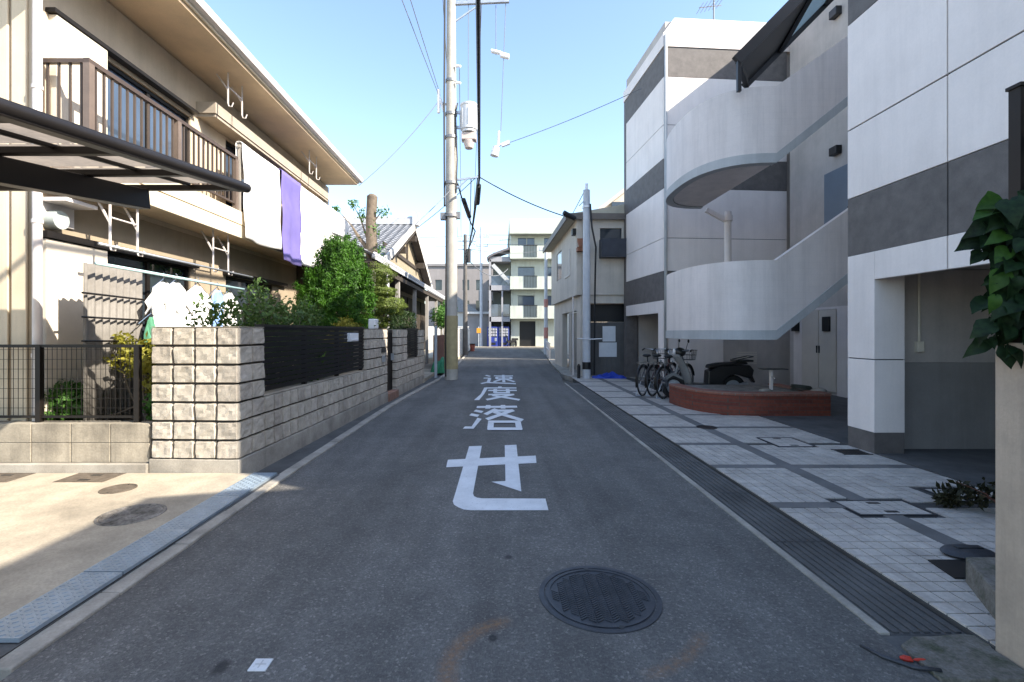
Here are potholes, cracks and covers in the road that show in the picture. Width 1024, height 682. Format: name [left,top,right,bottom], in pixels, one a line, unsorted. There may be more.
utility cover [54,473,126,482]
utility cover [0,473,35,482]
manhole cover [98,483,138,494]
utility cover [831,500,938,516]
utility cover [757,437,817,447]
manhole cover [94,503,167,526]
manhole cover [539,566,663,634]
